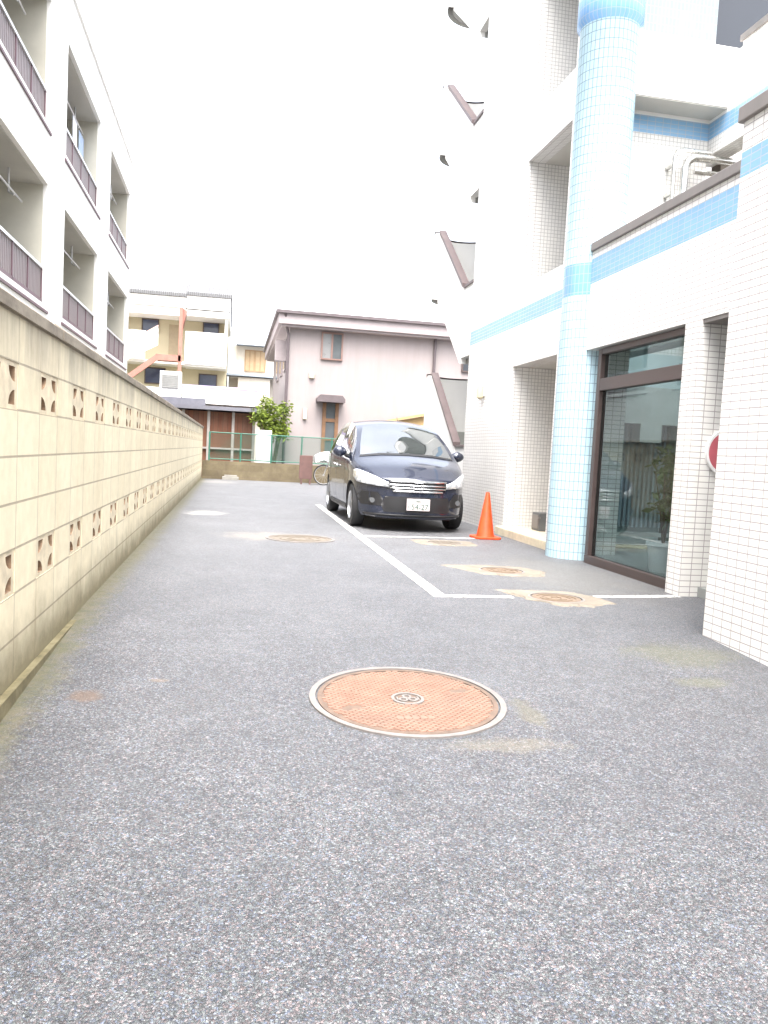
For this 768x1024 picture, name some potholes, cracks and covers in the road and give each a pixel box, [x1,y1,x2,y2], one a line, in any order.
manhole cover [265,534,335,543]
manhole cover [309,667,507,739]
